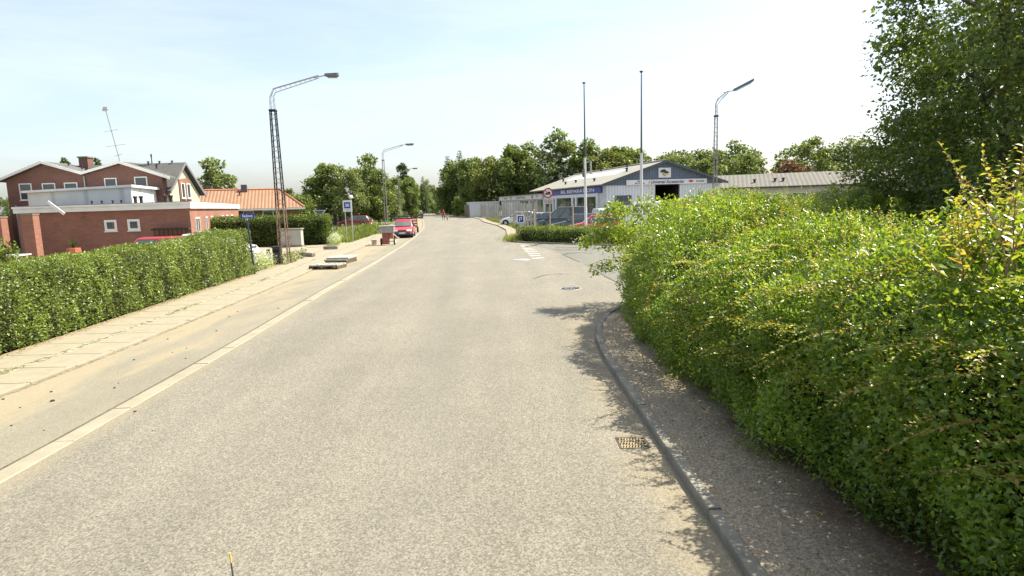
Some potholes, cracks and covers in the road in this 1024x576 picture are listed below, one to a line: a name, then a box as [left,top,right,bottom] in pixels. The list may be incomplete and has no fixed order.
drain grate [615,436,651,449]
